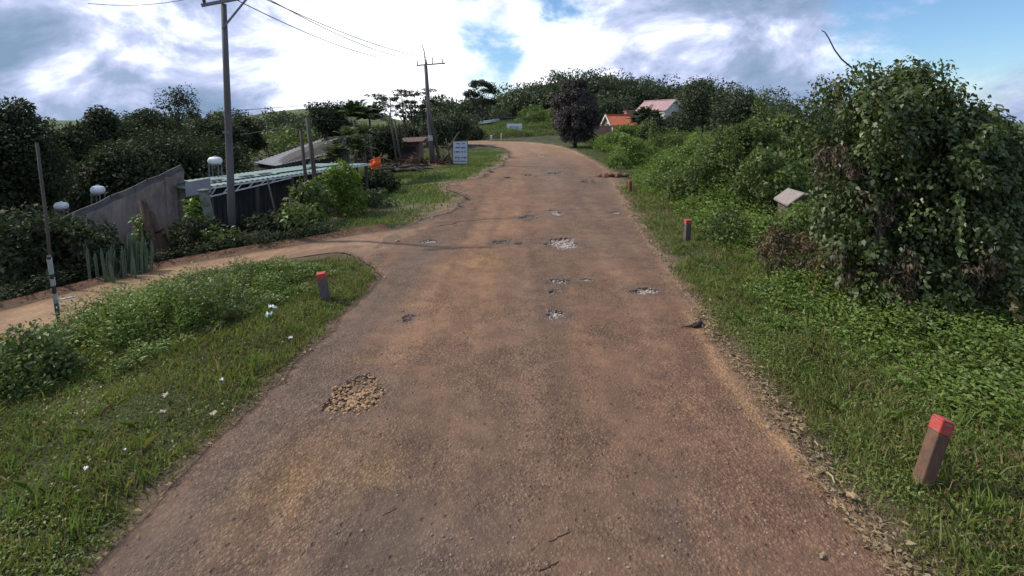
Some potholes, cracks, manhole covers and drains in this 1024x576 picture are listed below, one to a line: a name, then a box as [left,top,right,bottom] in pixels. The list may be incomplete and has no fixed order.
pothole [315,372,387,418]
pothole [546,310,565,320]
pothole [544,237,581,250]
